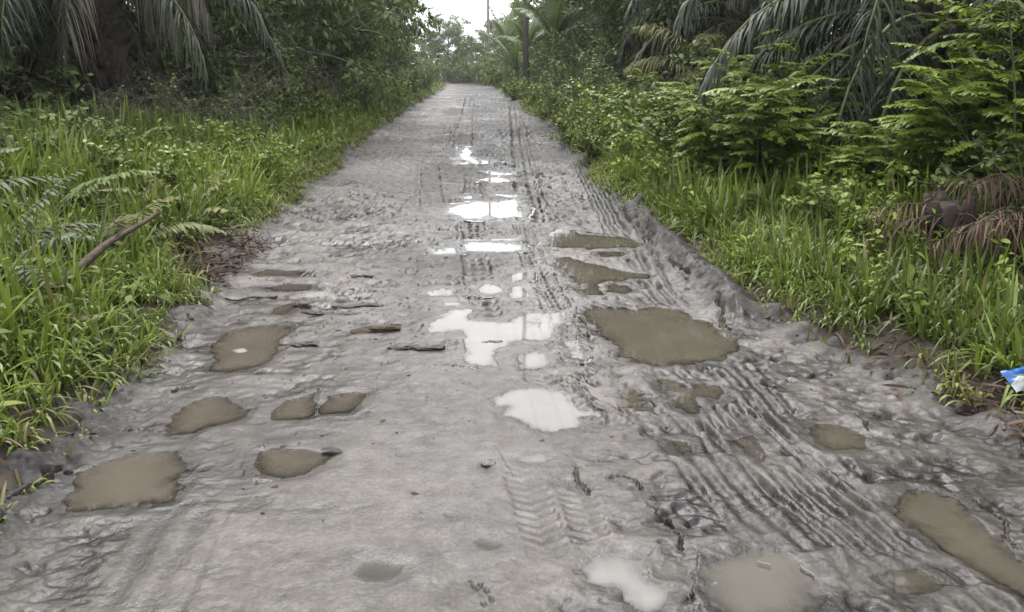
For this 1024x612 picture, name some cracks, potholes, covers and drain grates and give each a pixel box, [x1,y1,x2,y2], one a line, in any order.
pothole [159,391,258,439]
pothole [313,386,375,415]
pothole [535,253,656,297]
pothole [478,382,600,435]
pothole [854,558,959,601]
pothole [689,534,839,612]
pothole [800,417,876,453]
pothole [573,303,746,369]
pothole [250,445,342,481]
pothole [539,224,645,250]
pothole [204,320,296,373]
pothole [424,305,566,369]
